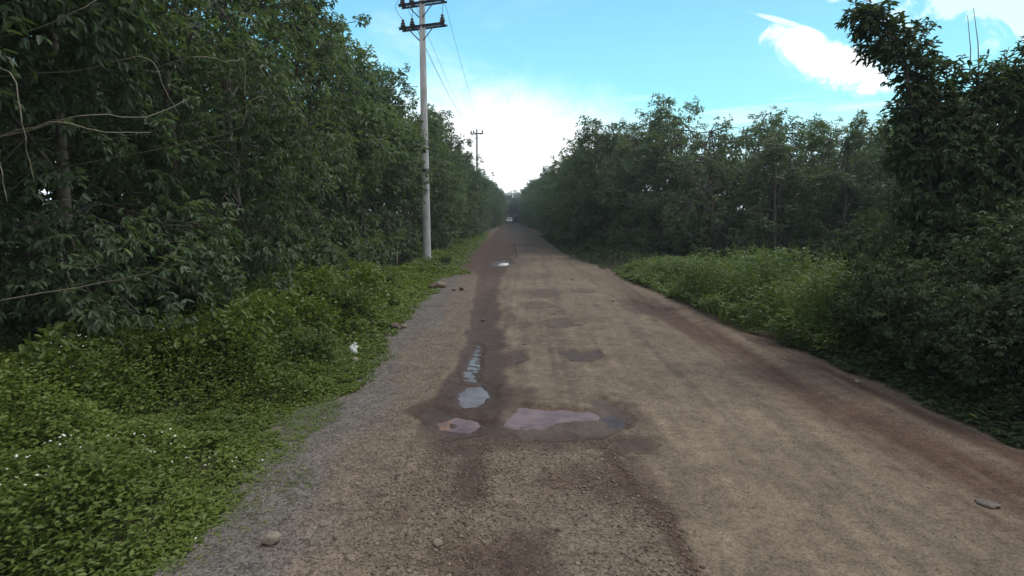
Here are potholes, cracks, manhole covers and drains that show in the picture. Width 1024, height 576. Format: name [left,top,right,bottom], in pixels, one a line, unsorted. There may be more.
pothole [489,259,516,267]
pothole [444,380,503,411]
pothole [506,351,529,366]
pothole [542,318,575,328]
pothole [497,394,638,443]
pothole [557,348,605,361]
